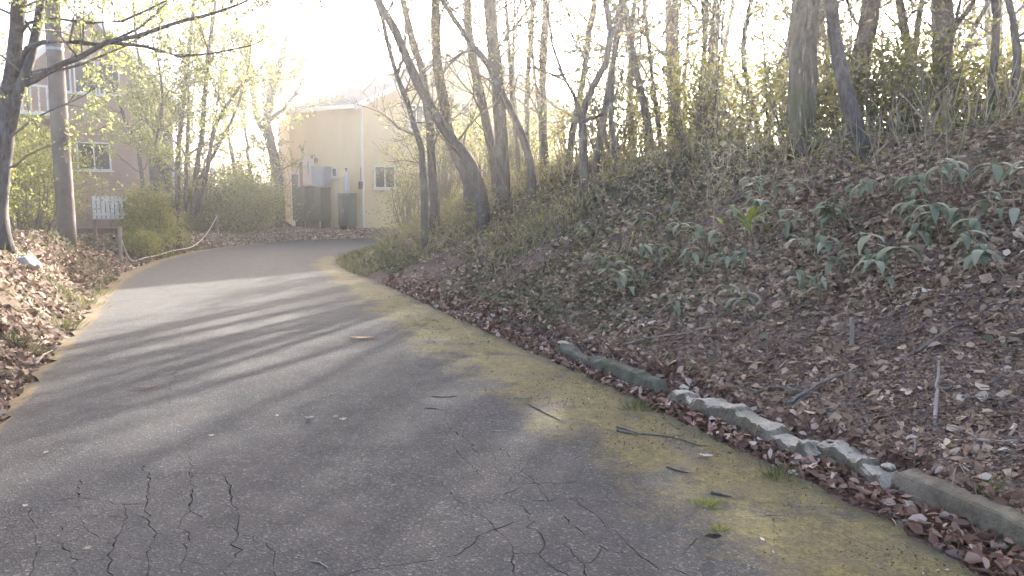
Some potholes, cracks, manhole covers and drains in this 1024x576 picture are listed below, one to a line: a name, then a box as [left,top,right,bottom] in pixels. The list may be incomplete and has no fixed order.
crack [340,448,698,576]
crack [28,439,276,576]
